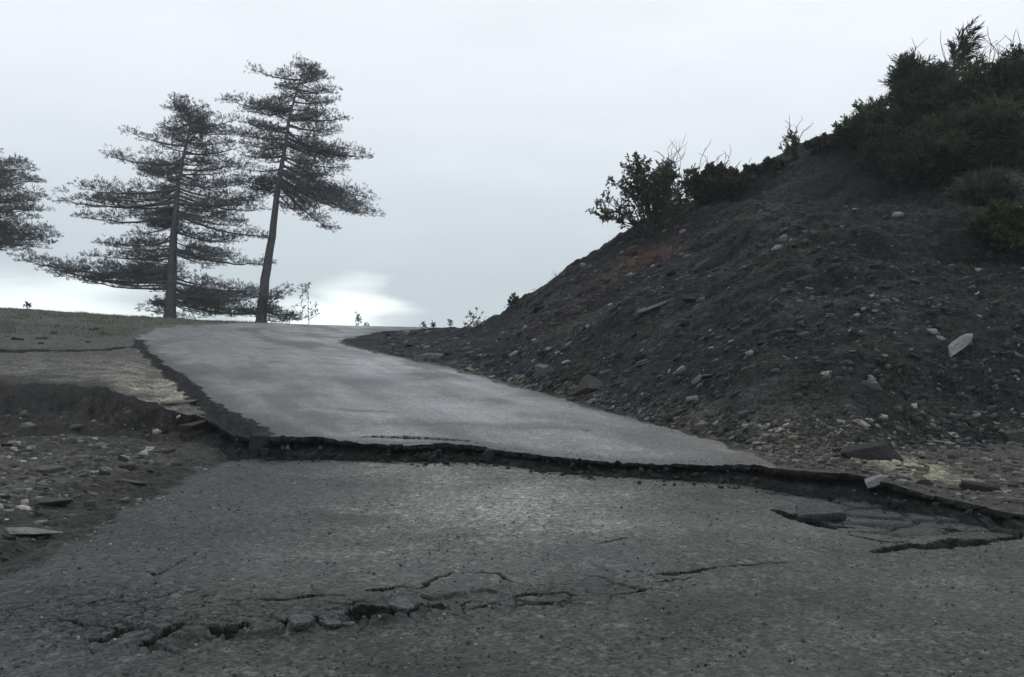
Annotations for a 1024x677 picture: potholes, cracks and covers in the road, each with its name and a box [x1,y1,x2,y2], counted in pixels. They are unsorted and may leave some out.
crack [612,562,778,596]
crack [59,596,143,637]
crack [264,572,574,627]
crack [0,339,1024,544]
